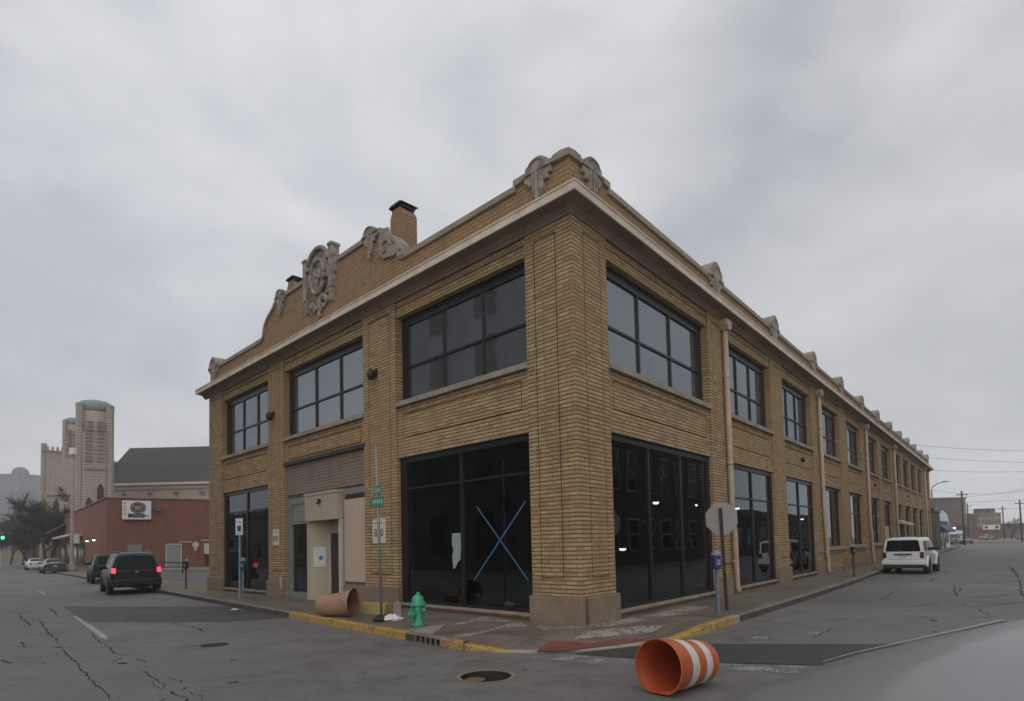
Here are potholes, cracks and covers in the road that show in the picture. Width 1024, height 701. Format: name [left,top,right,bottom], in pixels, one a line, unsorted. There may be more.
crack [1,608,207,701]
drain grate [414,633,446,647]
crack [881,553,1024,615]
manhole cover [457,670,515,683]
